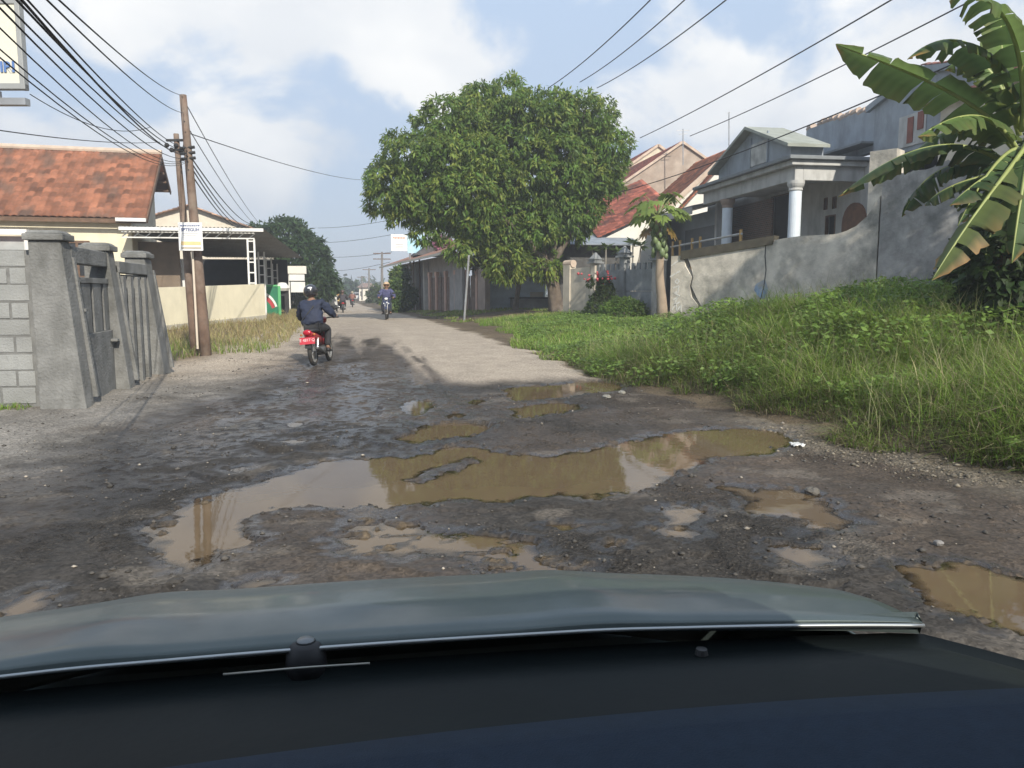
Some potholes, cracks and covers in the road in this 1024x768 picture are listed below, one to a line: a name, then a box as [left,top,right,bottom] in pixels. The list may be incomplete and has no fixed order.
pothole [396,398,444,416]
pothole [872,553,1024,640]
pothole [497,378,631,402]
pothole [750,536,852,572]
pothole [0,580,79,617]
pothole [386,419,501,444]
pothole [498,400,587,419]
pothole [122,425,804,576]
